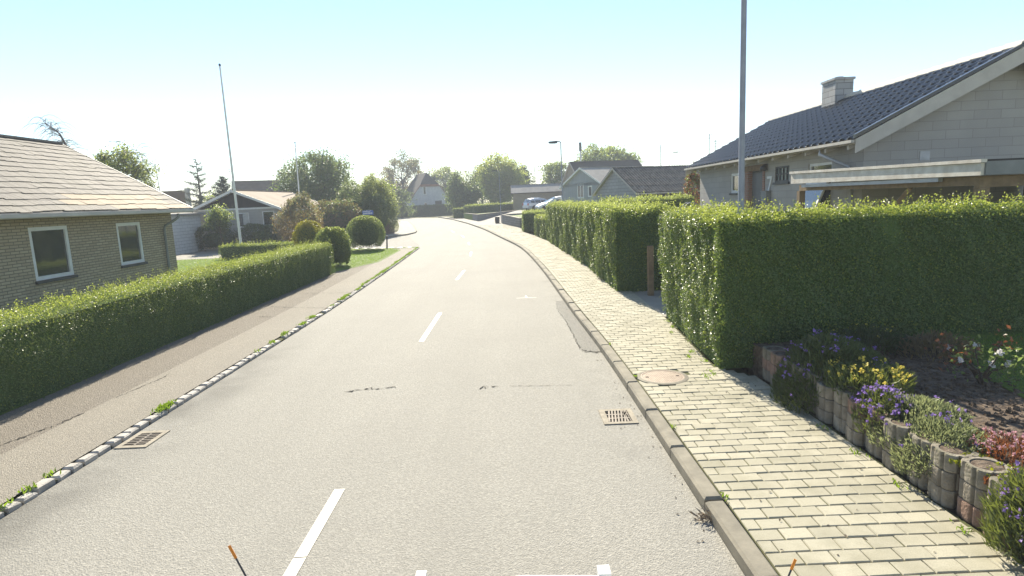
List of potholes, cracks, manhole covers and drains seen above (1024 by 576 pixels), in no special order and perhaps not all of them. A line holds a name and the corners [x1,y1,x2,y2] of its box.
drain grate [114,430,170,449]
drain grate [598,408,639,425]
manhole cover [636,369,689,386]
